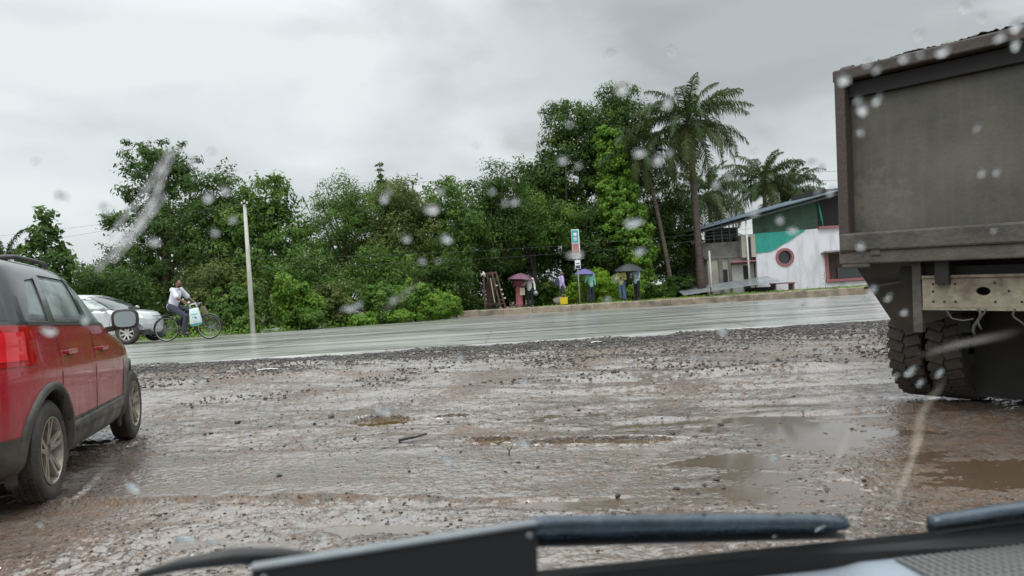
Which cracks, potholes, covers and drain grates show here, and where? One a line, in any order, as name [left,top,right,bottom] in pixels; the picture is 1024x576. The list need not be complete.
pothole [339,413,432,427]
pothole [498,434,710,447]
pothole [466,435,524,446]
